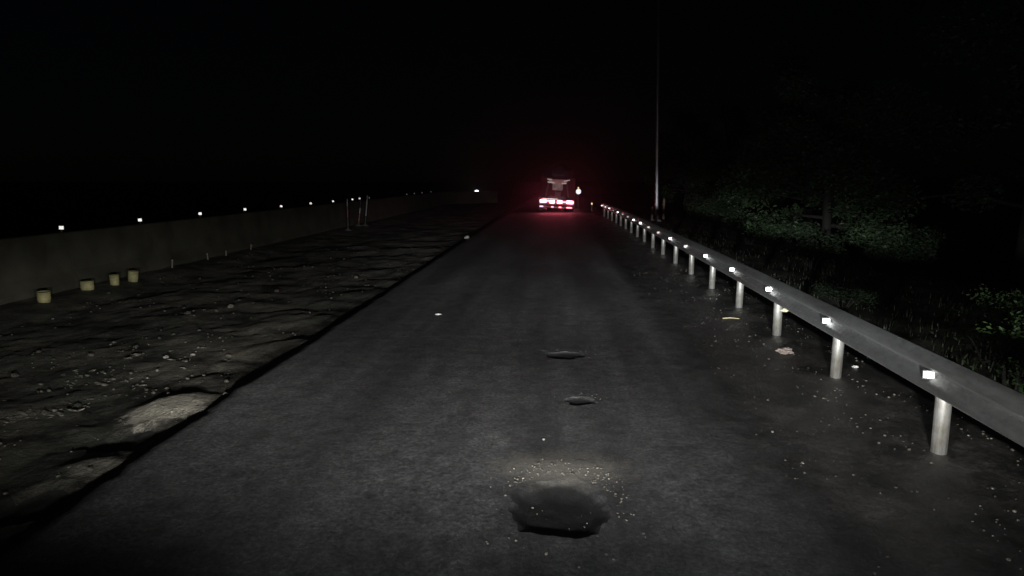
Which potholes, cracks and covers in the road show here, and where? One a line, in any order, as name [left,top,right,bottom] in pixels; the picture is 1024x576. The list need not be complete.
pothole [542,349,596,360]
pothole [554,393,601,408]
pothole [472,458,654,568]
